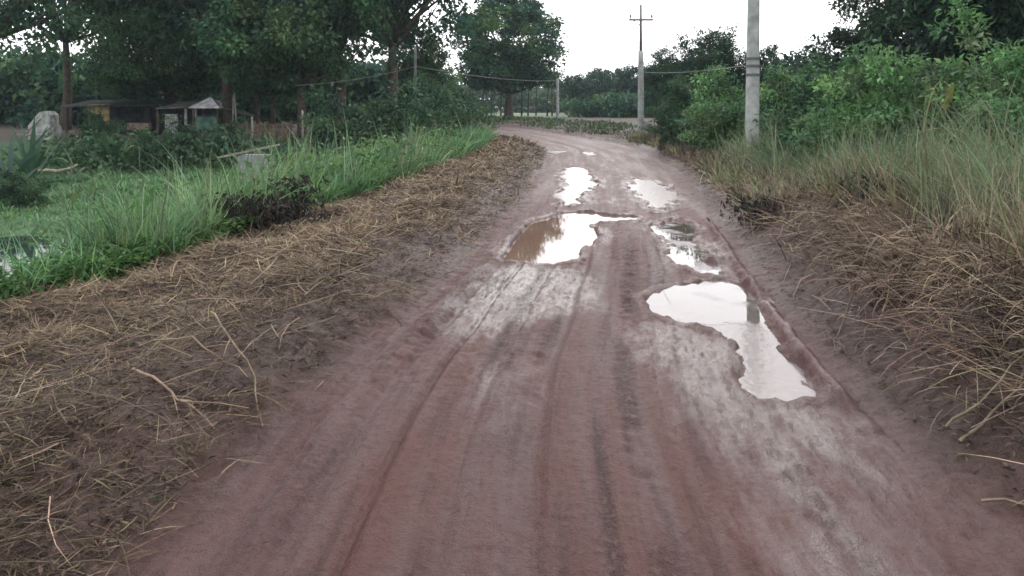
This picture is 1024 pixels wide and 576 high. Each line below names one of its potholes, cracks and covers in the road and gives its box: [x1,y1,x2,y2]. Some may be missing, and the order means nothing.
pothole [619,176,686,214]
pothole [546,164,607,207]
pothole [634,274,850,409]
pothole [640,216,739,278]
pothole [492,209,646,267]
